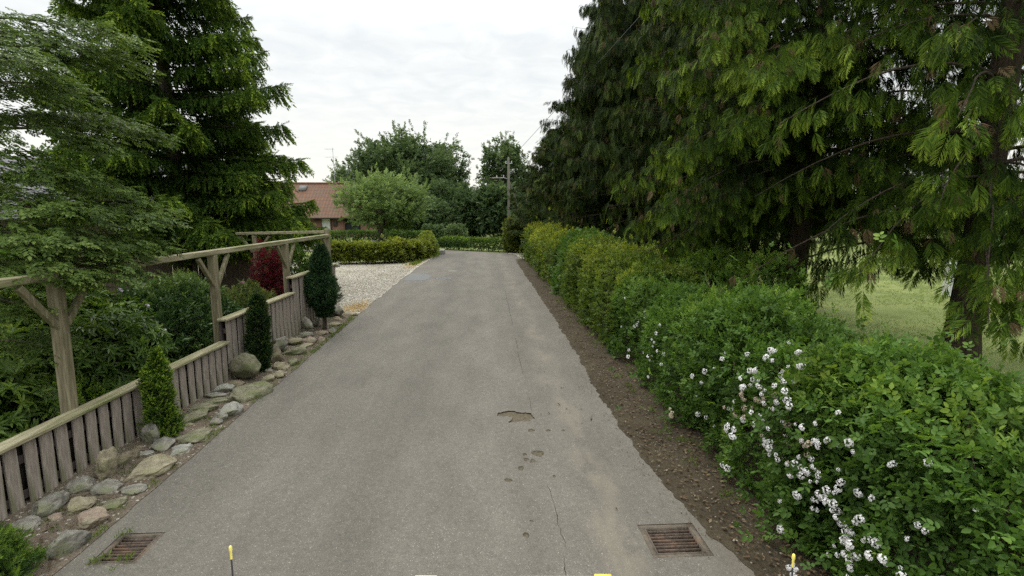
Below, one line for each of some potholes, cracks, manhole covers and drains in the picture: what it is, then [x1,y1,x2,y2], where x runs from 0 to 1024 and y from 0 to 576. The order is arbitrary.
pothole [497,411,535,423]
drain grate [637,523,714,558]
drain grate [89,533,165,565]
